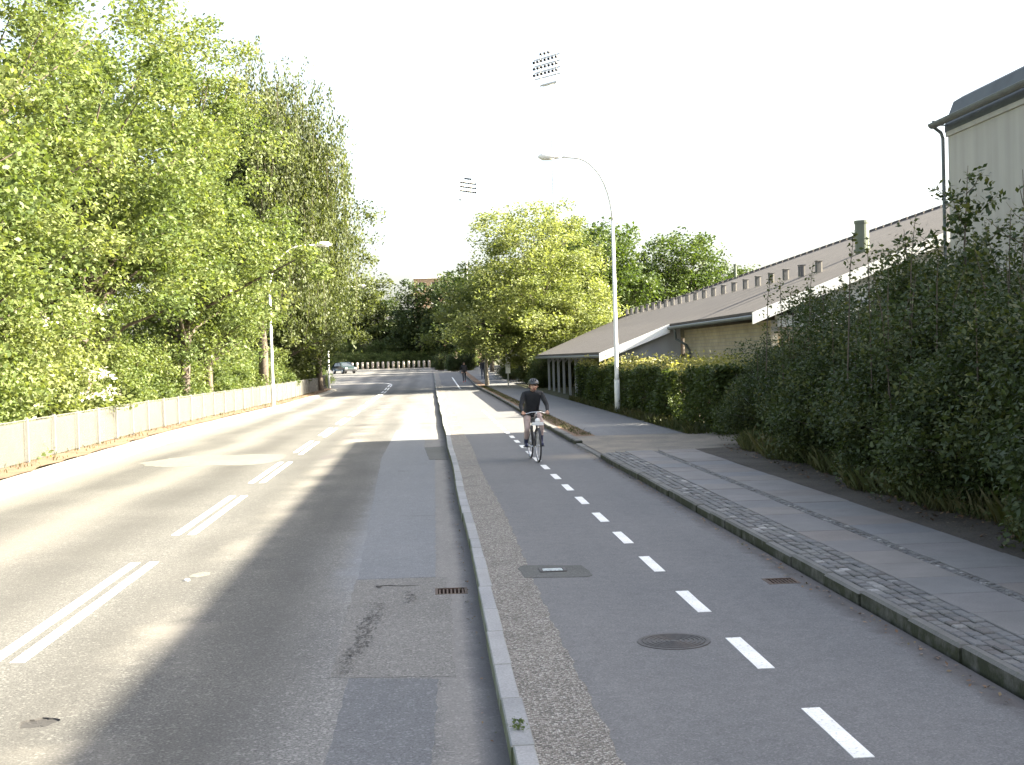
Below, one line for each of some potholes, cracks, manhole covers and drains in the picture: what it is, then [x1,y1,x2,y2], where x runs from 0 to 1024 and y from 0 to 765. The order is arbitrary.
manhole cover [637,633,710,650]
drain grate [435,587,468,595]
crack [336,585,416,674]
pothole [19,717,60,729]
